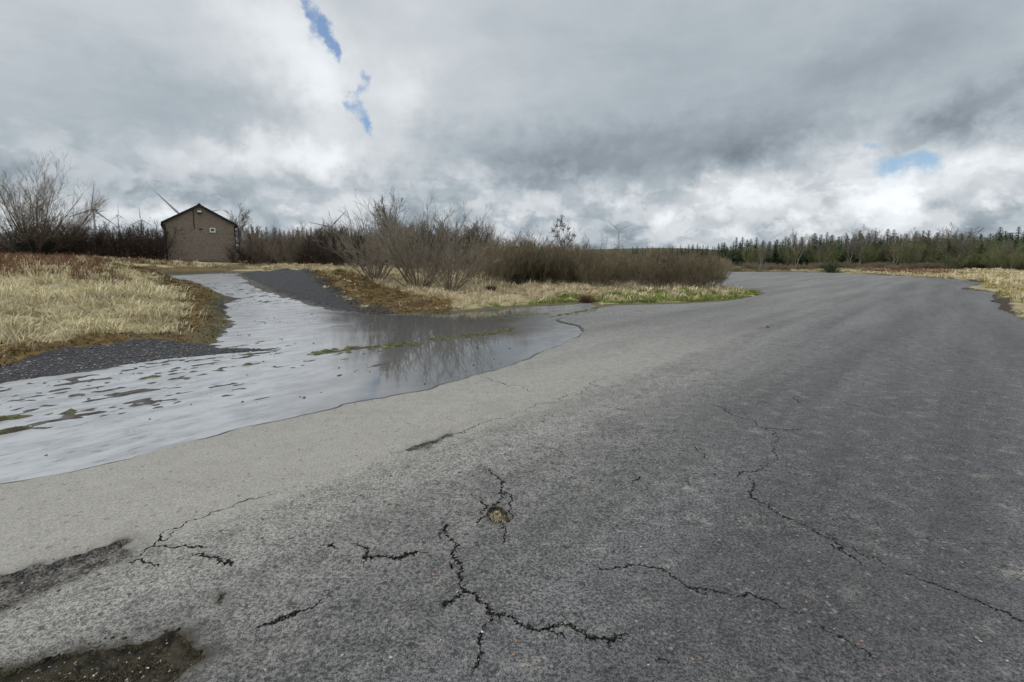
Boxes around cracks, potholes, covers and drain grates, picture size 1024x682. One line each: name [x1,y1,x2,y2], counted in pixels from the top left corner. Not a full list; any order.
crack [586,563,881,662]
pothole [486,506,509,523]
pothole [0,617,222,682]
pothole [0,537,135,612]
crack [320,468,629,669]
crack [126,491,282,567]
crack [710,403,1024,622]
crack [252,595,334,631]
